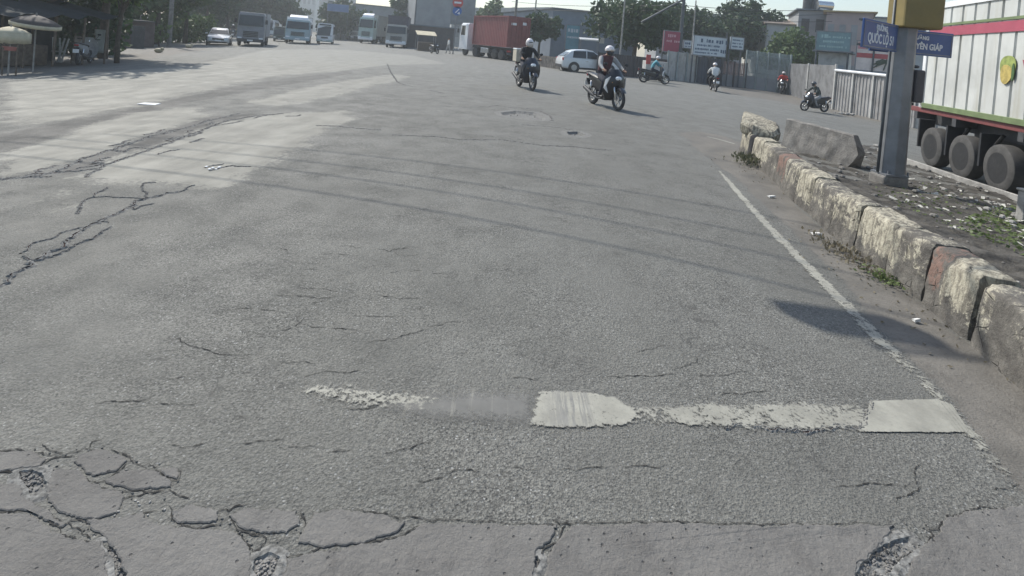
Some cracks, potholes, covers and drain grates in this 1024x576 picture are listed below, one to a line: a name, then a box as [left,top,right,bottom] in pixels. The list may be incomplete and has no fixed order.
pothole [856,529,925,576]
crack [387,64,441,93]
pothole [249,544,290,576]
pothole [6,464,53,503]
crack [0,439,888,558]
crack [0,113,301,288]
